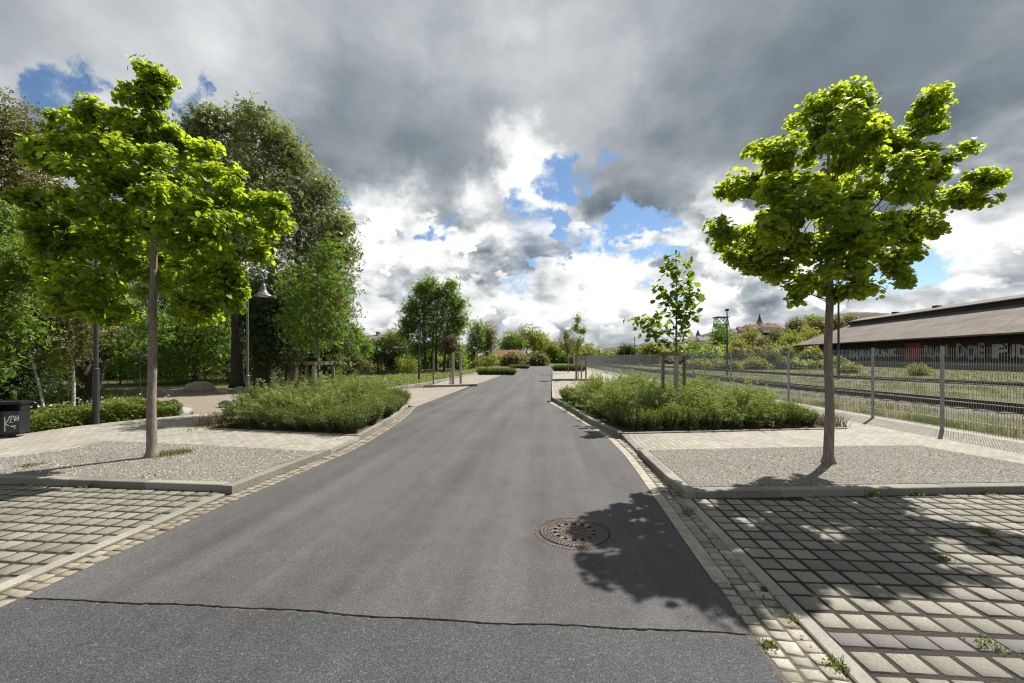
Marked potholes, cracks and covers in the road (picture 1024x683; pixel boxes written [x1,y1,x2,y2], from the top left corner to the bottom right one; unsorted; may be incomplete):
manhole cover [534,516,615,550]
